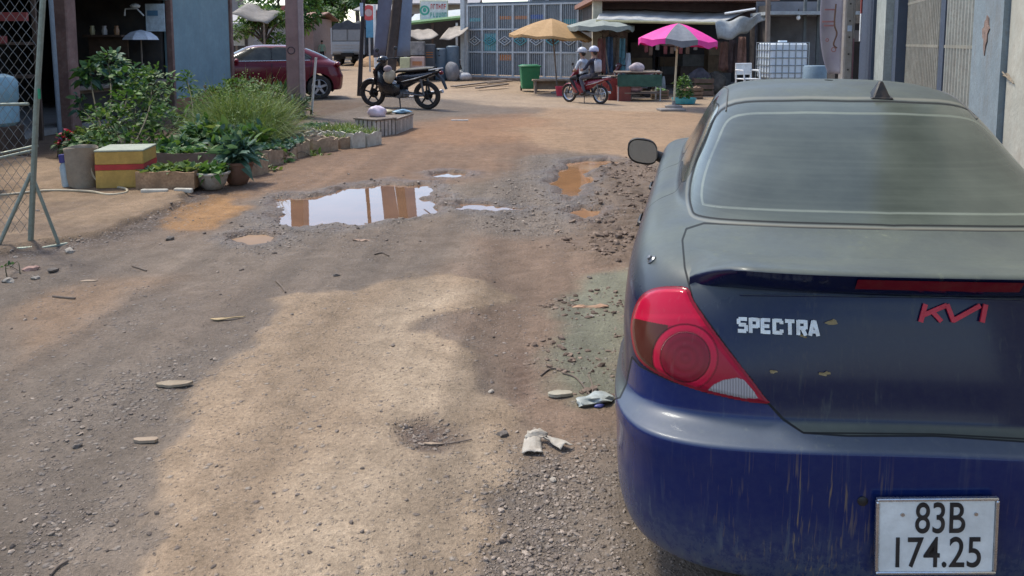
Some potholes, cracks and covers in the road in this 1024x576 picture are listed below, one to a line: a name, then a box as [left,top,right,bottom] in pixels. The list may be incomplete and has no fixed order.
pothole [214,225,292,247]
pothole [533,155,632,203]
pothole [551,202,618,224]
pothole [250,179,455,230]
